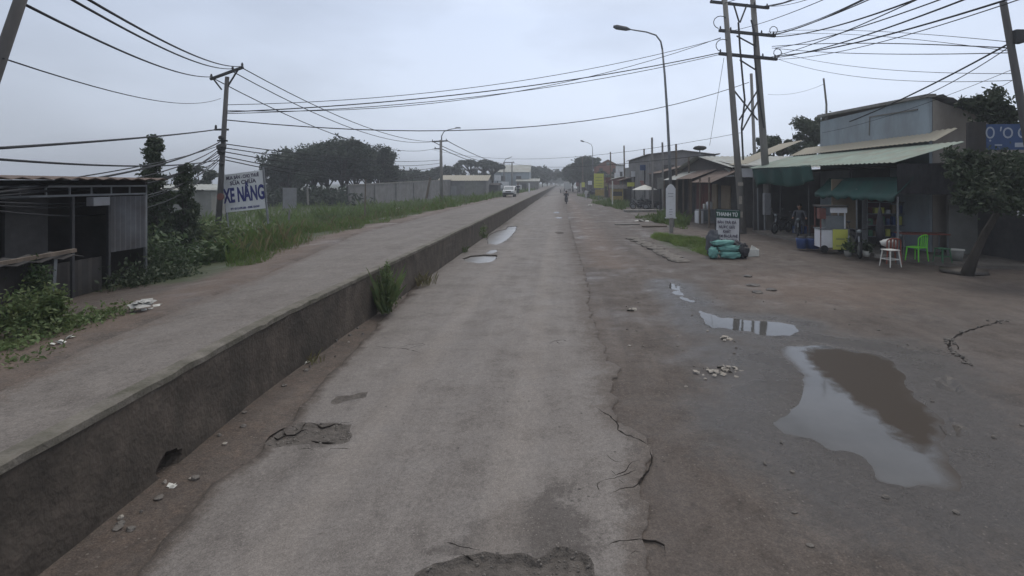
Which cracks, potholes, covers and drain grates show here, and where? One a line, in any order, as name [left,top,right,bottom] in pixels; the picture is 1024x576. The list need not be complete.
pothole [414,545,595,576]
crack [609,539,666,554]
crack [947,320,1004,365]
crack [596,407,653,494]
pothole [264,422,352,448]
